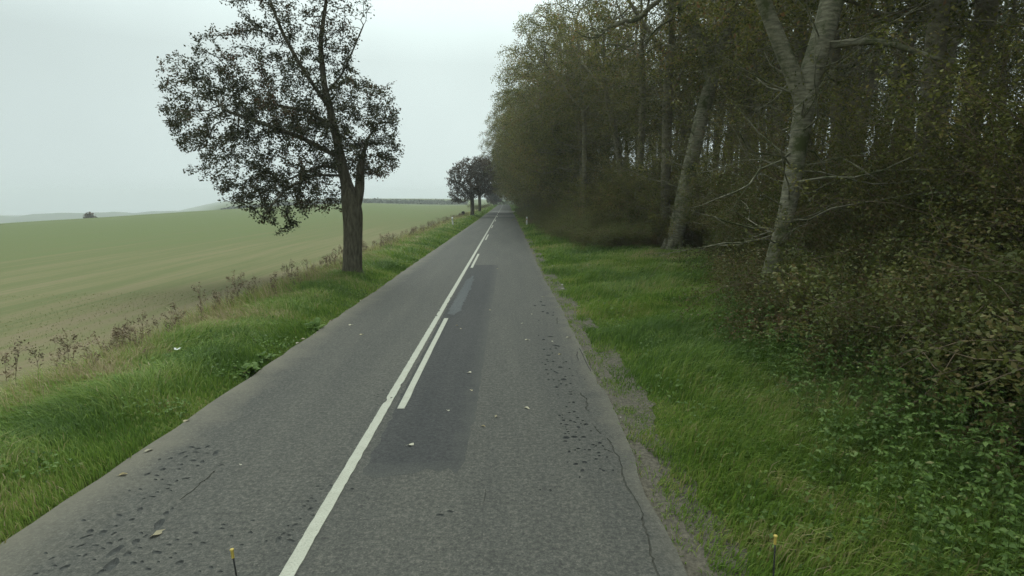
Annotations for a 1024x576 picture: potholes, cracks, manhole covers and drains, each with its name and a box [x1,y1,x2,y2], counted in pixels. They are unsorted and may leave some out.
crack [580,392,660,576]
crack [180,470,216,500]
pothole [103,558,120,572]
